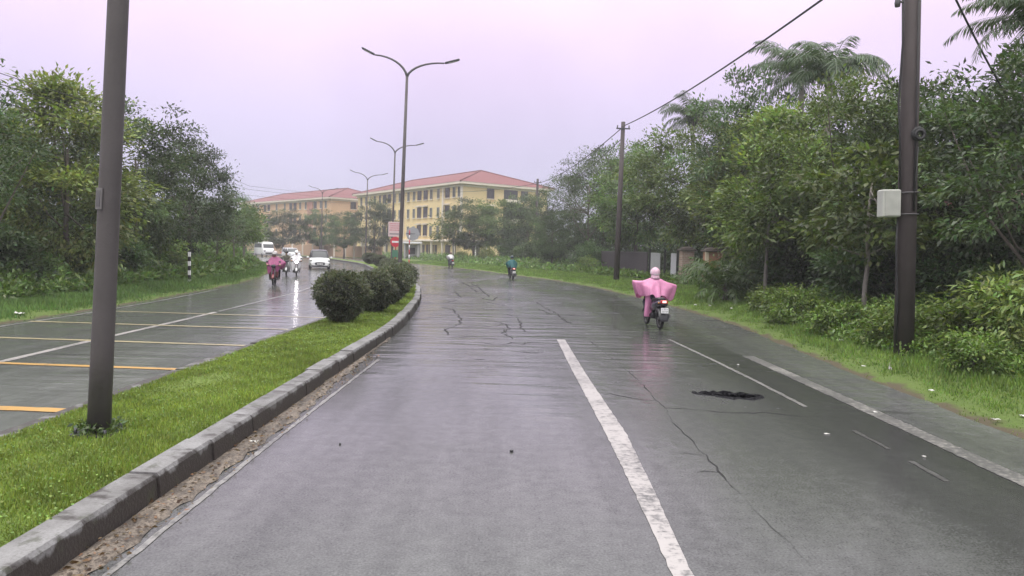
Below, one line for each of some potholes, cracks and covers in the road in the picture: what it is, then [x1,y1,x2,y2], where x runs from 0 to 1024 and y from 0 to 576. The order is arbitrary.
pothole [692,390,765,400]
crack [592,342,820,573]
crack [442,282,571,353]
